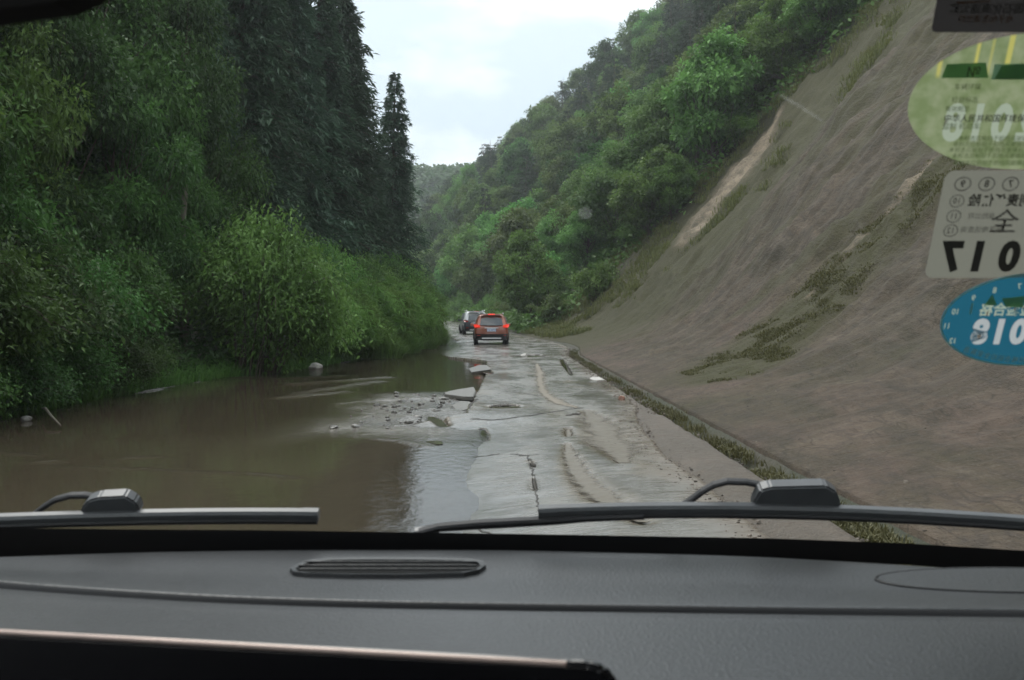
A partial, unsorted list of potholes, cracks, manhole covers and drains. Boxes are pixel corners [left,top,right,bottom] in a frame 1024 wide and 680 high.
crack [517,454,539,507]
pothole [427,417,449,427]
